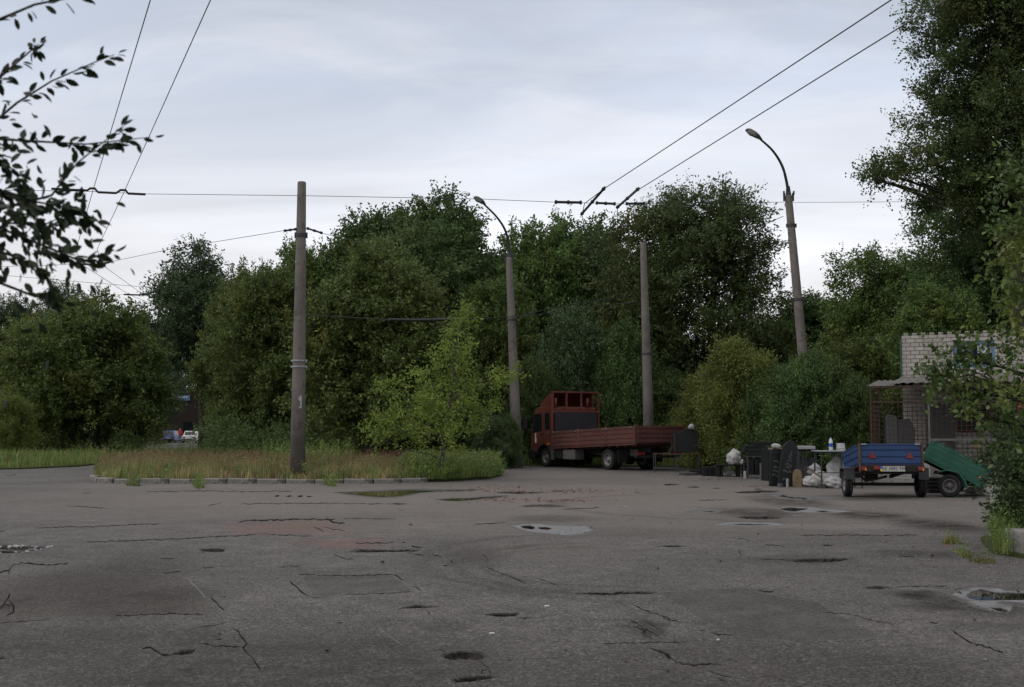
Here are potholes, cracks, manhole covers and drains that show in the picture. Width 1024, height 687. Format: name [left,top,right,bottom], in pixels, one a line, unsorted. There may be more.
pothole [440,650,487,661]
crack [929,622,1003,653]
crack [603,593,878,683]
pothole [0,544,53,554]
crack [115,558,261,671]
